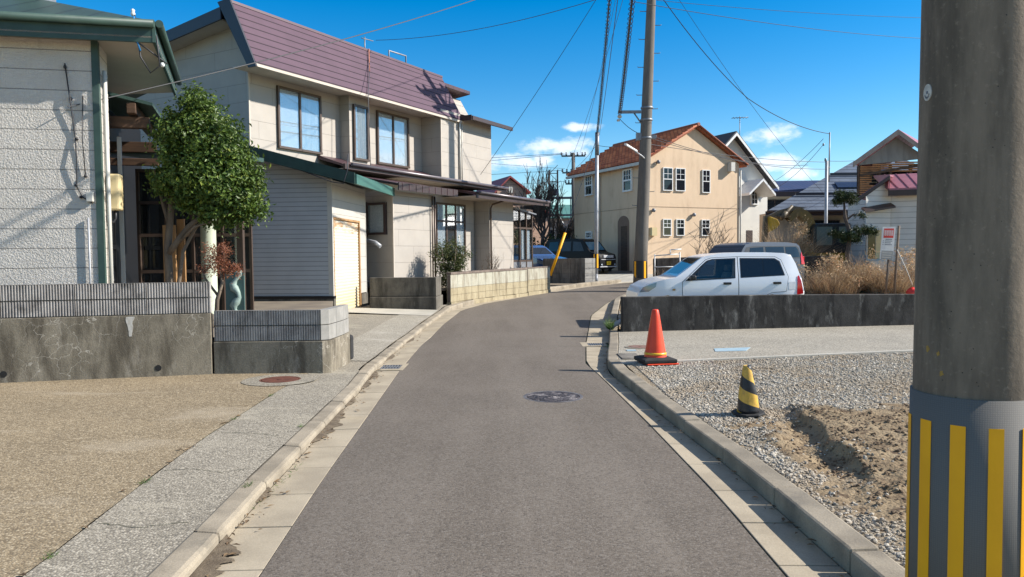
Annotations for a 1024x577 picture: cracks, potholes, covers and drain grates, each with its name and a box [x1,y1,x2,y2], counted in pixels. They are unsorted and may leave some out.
manhole cover [241,374,318,386]
manhole cover [523,391,583,403]
drain grate [376,363,409,371]
